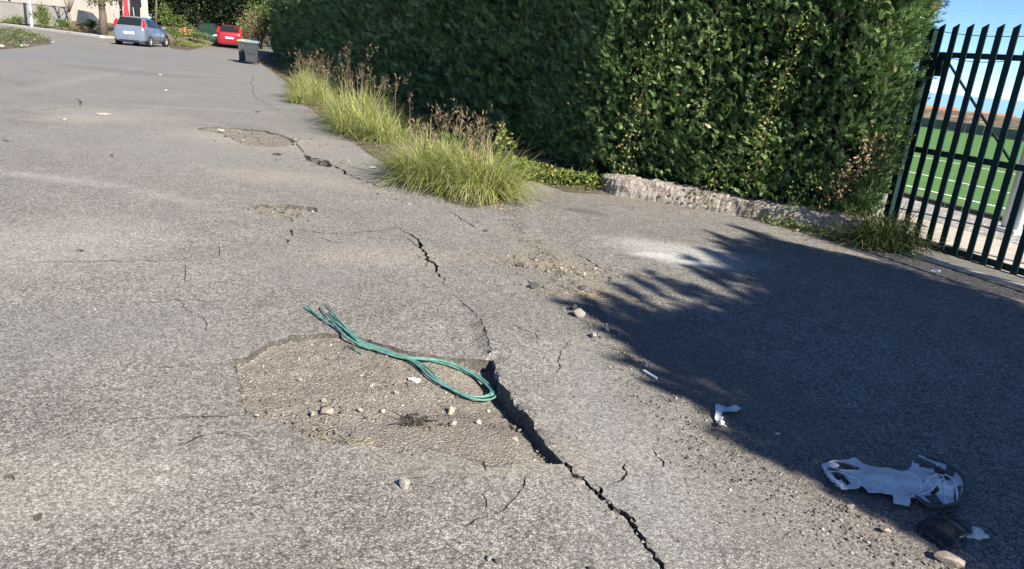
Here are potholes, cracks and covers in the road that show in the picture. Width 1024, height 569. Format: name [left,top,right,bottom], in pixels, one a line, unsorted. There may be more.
crack [566,461,664,569]
crack [105,415,273,448]
pothole [253,204,318,222]
crack [327,163,379,188]
crack [464,462,528,526]
pothole [197,127,296,147]
pothole [233,333,563,468]
